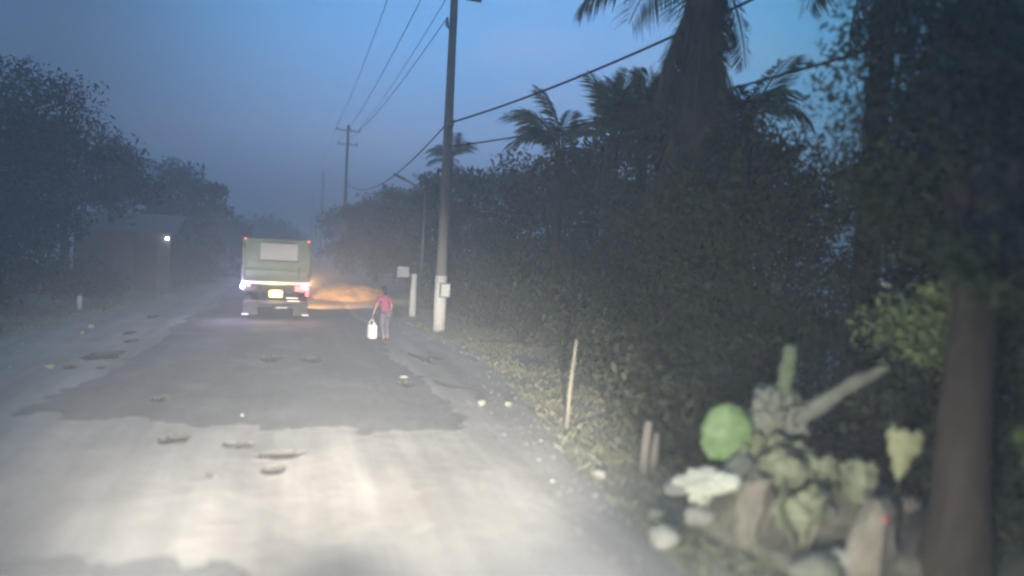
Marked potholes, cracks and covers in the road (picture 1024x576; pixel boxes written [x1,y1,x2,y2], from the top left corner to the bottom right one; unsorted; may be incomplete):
pothole [156,433,192,446]
pothole [220,441,256,449]
pothole [258,463,289,477]
pothole [149,394,171,403]
pothole [259,355,284,363]
pothole [297,356,323,364]
pothole [395,380,416,388]
pothole [78,349,128,360]
pothole [249,449,309,461]
